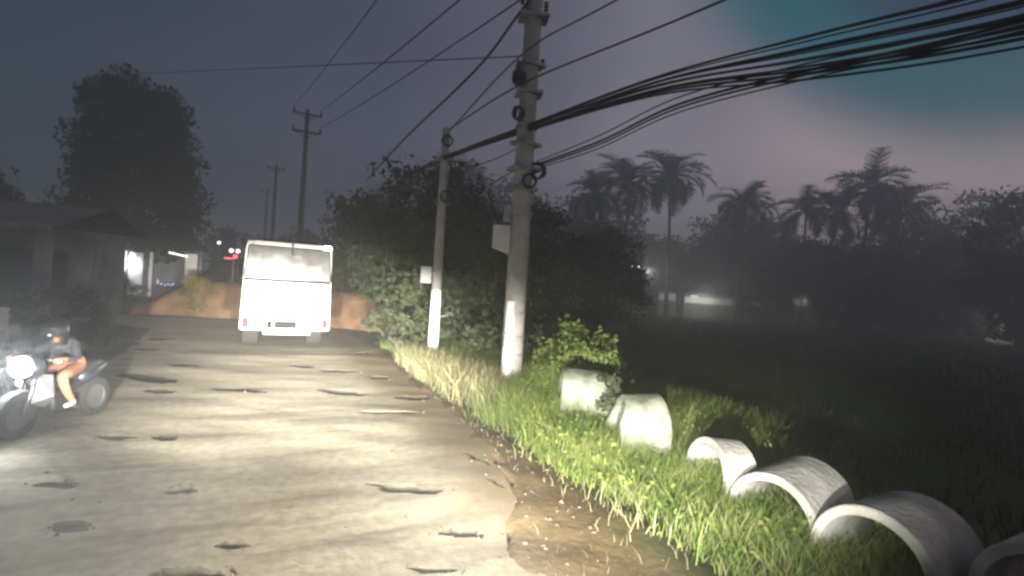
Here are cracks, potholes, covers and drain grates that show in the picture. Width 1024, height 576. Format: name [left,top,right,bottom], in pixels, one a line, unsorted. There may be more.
pothole [365,482,446,495]
pothole [405,565,461,574]
pothole [213,540,251,549]
pothole [94,433,137,441]
pothole [110,373,181,384]
pothole [164,486,198,495]
pothole [438,526,485,538]
pothole [52,520,93,533]
